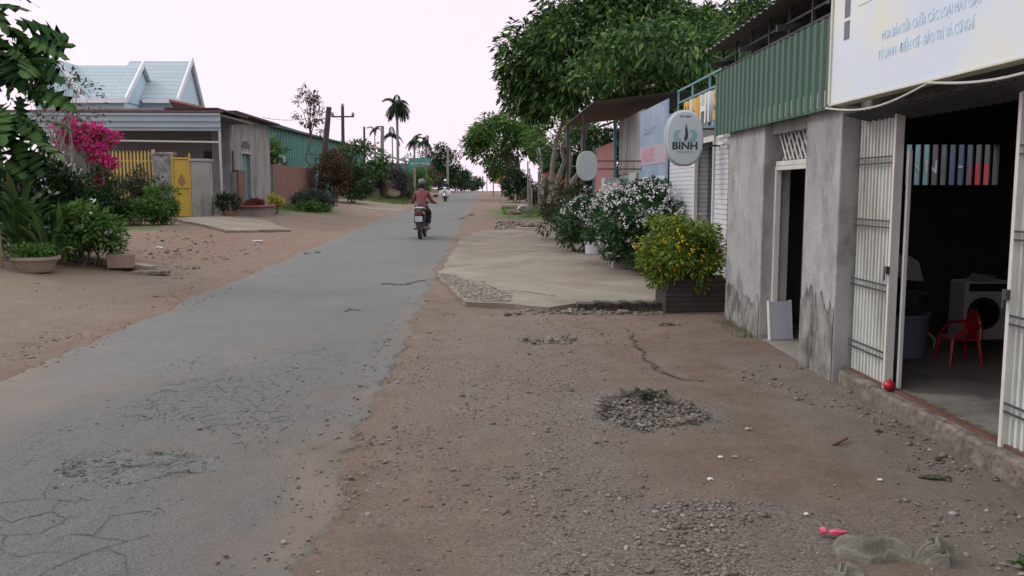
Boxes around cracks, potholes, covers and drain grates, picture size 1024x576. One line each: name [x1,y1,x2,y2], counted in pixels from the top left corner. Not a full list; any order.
pothole [54,448,225,487]
crack [625,328,706,381]
pothole [519,336,578,345]
crack [123,375,310,447]
pothole [593,393,730,433]
crack [0,483,152,576]
